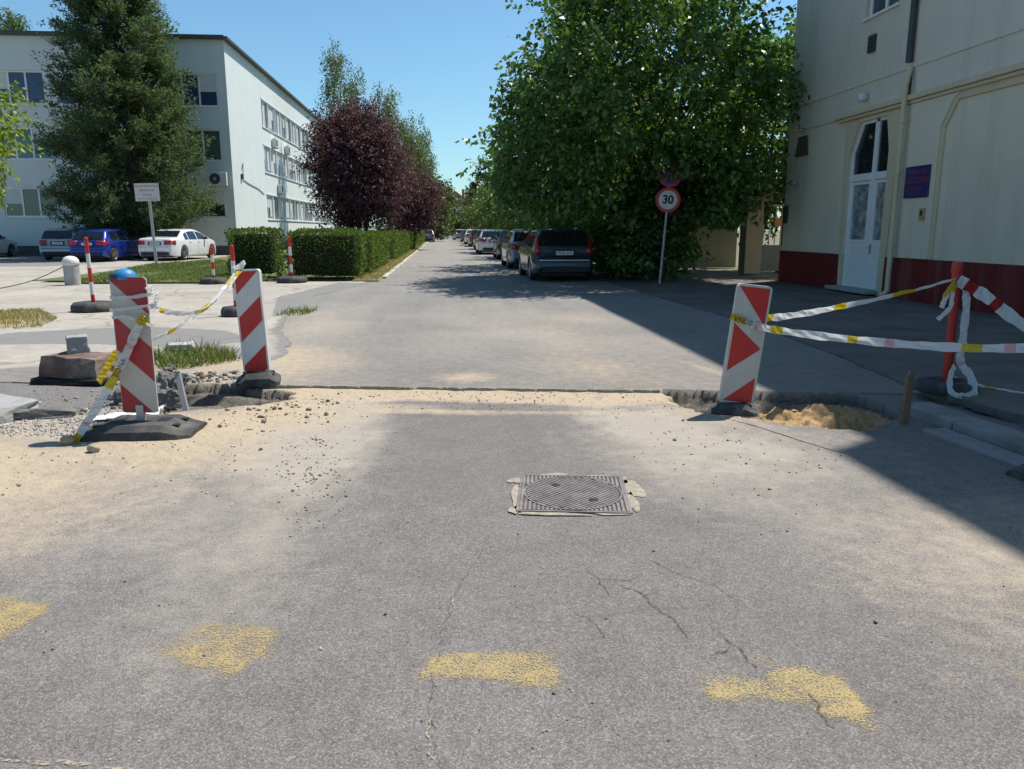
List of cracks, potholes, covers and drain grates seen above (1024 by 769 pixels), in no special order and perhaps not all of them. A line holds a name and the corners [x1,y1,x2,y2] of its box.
pothole [159,382,303,414]
crack [426,579,464,759]
manhole cover [507,473,646,515]
pothole [655,388,910,434]
